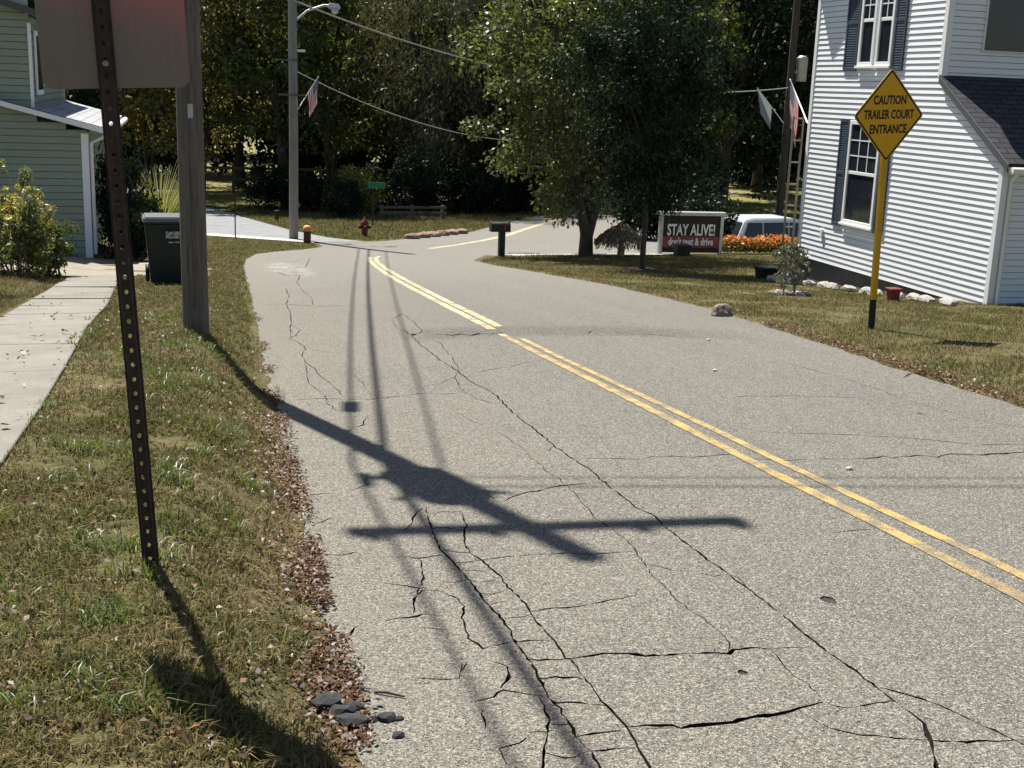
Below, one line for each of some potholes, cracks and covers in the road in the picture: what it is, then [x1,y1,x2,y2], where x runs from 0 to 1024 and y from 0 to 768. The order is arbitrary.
crack [272,259,1024,768]
